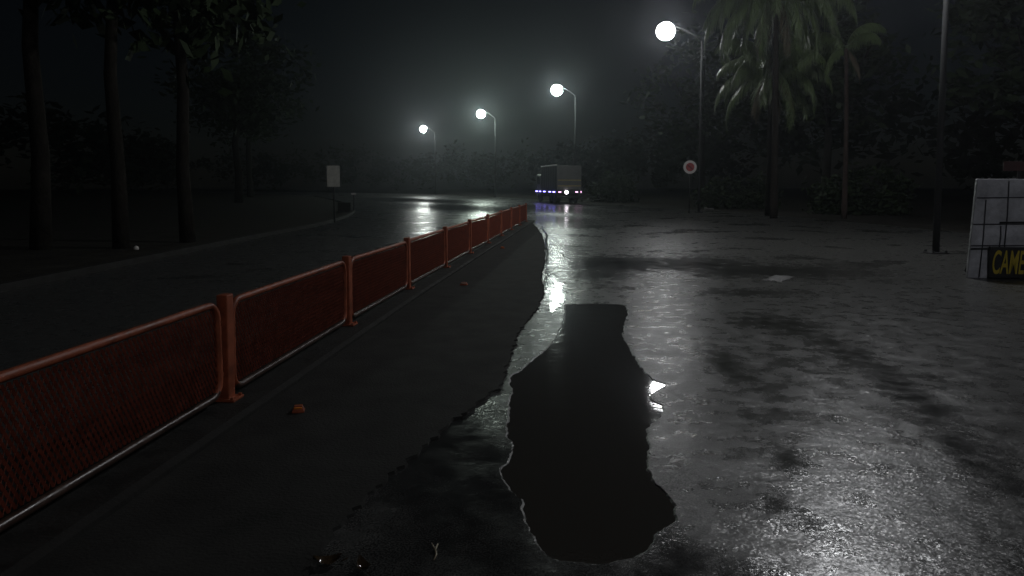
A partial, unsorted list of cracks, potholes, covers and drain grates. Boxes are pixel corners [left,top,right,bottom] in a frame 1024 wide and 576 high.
pothole [499,303,678,565]
